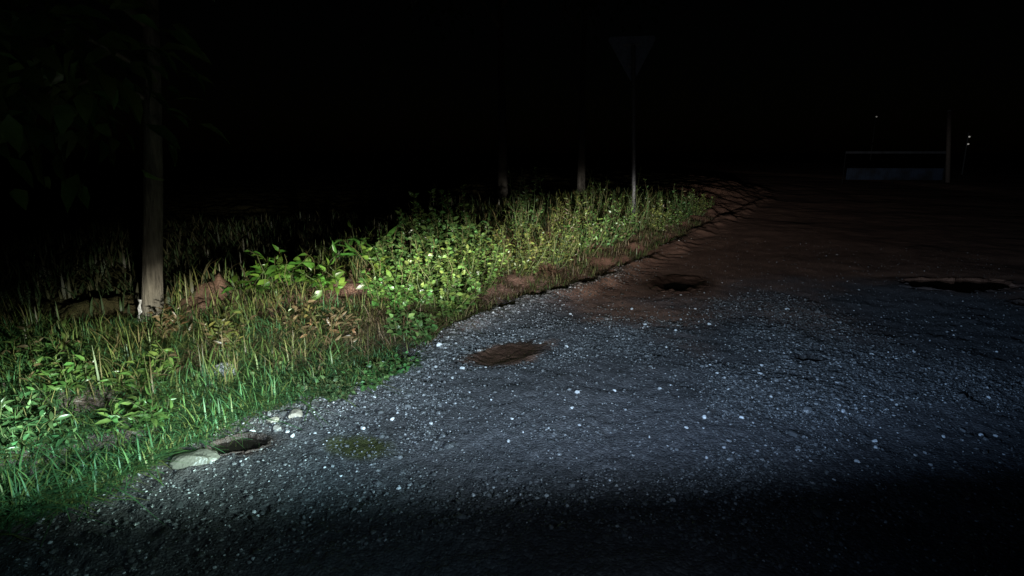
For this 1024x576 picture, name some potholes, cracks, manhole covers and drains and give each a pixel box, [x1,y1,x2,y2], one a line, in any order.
pothole [463,342,551,368]
pothole [893,277,1024,293]
pothole [203,431,274,456]
pothole [646,274,711,294]
